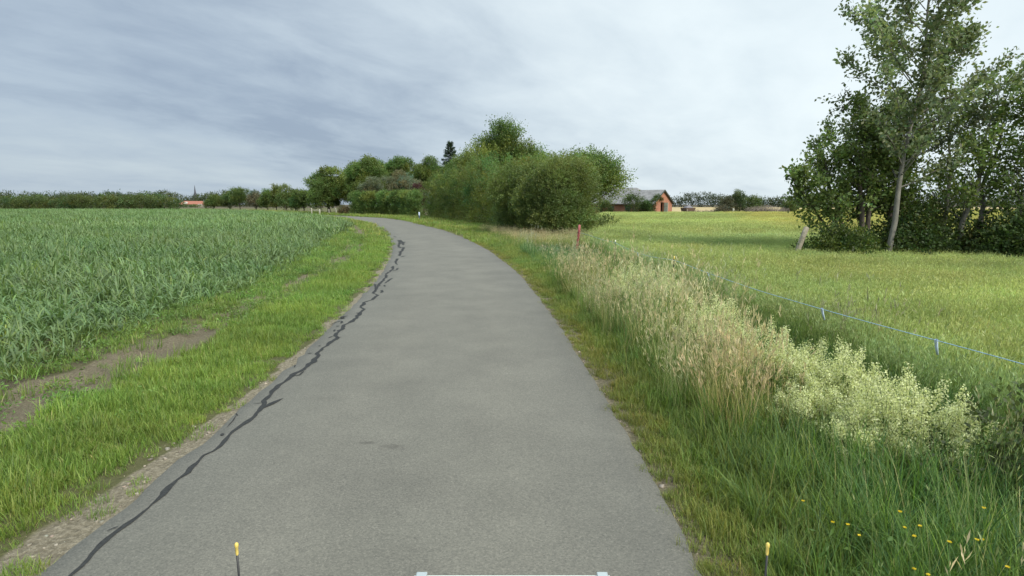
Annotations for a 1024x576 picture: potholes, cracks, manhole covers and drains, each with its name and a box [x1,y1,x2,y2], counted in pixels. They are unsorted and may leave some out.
crack [385,230,405,265]
